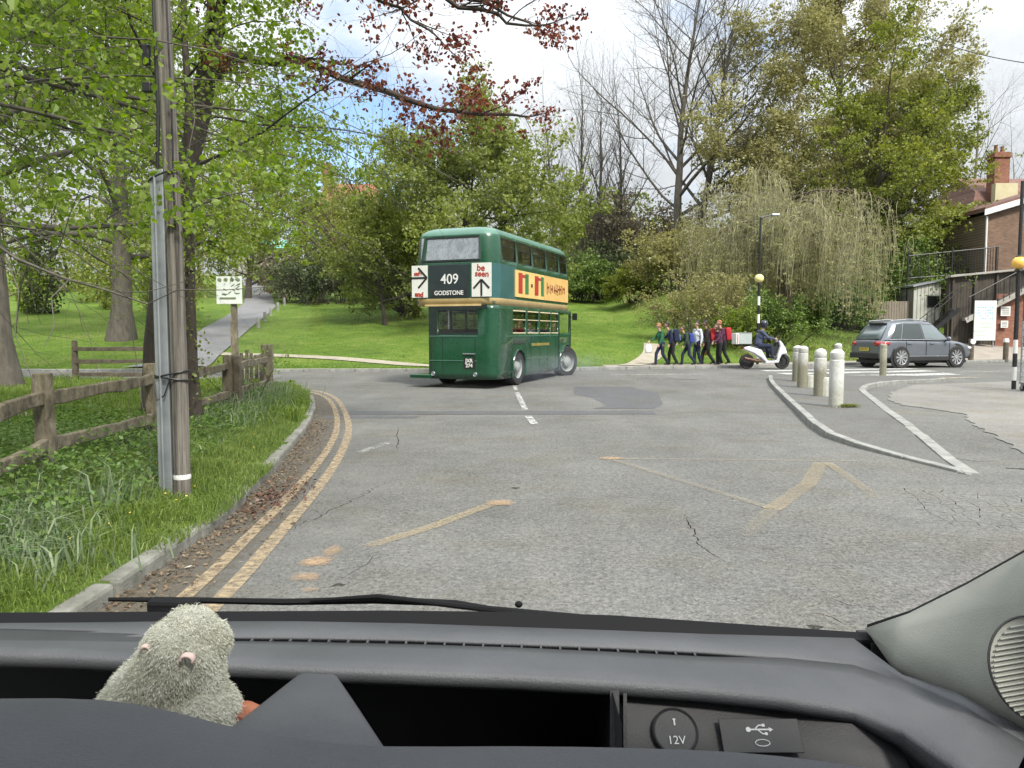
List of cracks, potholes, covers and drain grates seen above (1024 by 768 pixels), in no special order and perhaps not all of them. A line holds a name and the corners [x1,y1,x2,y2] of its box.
crack [291,482,386,530]
crack [686,517,729,565]
crack [890,487,1024,531]
